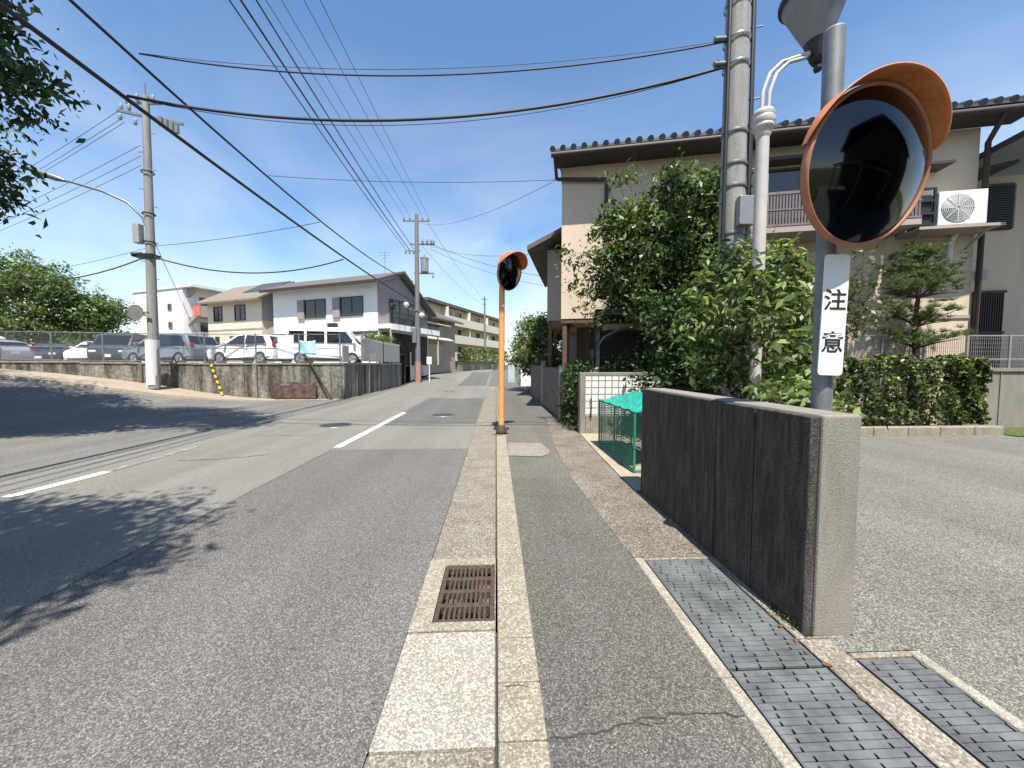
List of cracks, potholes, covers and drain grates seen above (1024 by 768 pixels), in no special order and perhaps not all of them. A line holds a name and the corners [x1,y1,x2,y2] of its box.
drain grate [857,657,1024,768]
crack [549,711,745,739]
drain grate [730,667,935,768]
drain grate [433,565,495,623]
drain grate [646,559,823,672]
